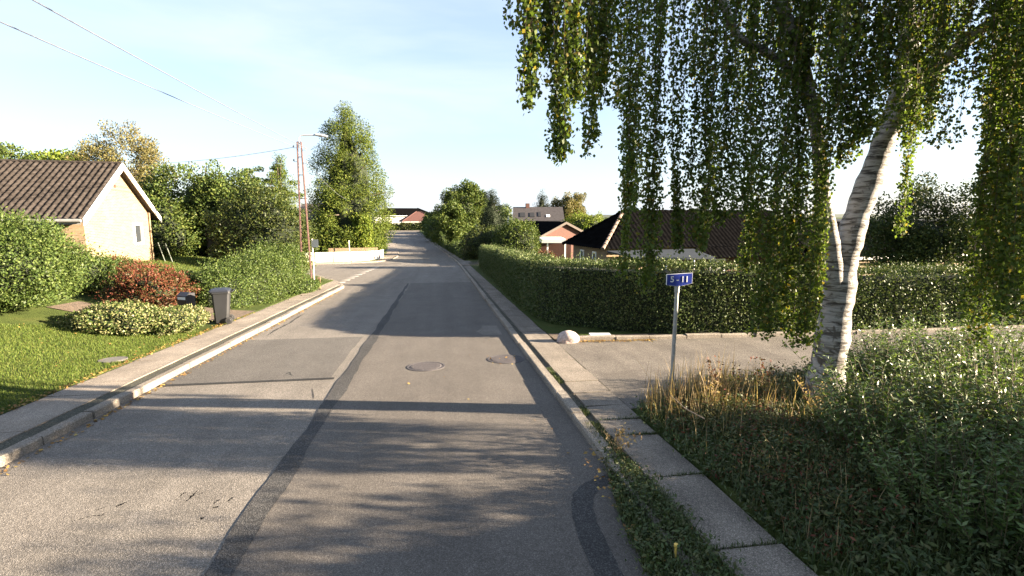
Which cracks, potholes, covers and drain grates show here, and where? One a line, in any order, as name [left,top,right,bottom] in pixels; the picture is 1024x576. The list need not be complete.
manhole cover [407,362,445,371]
manhole cover [487,355,524,364]
